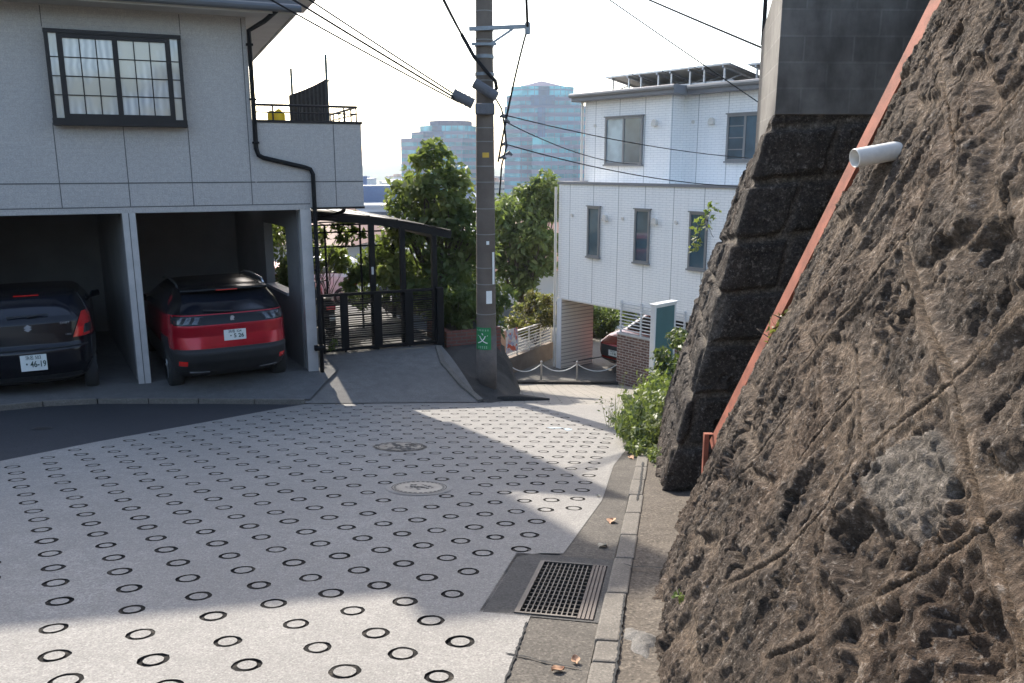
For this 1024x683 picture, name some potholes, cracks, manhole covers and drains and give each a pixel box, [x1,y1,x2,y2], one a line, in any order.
drain grate [514,560,607,621]
manhole cover [385,480,453,495]
manhole cover [374,442,427,451]
